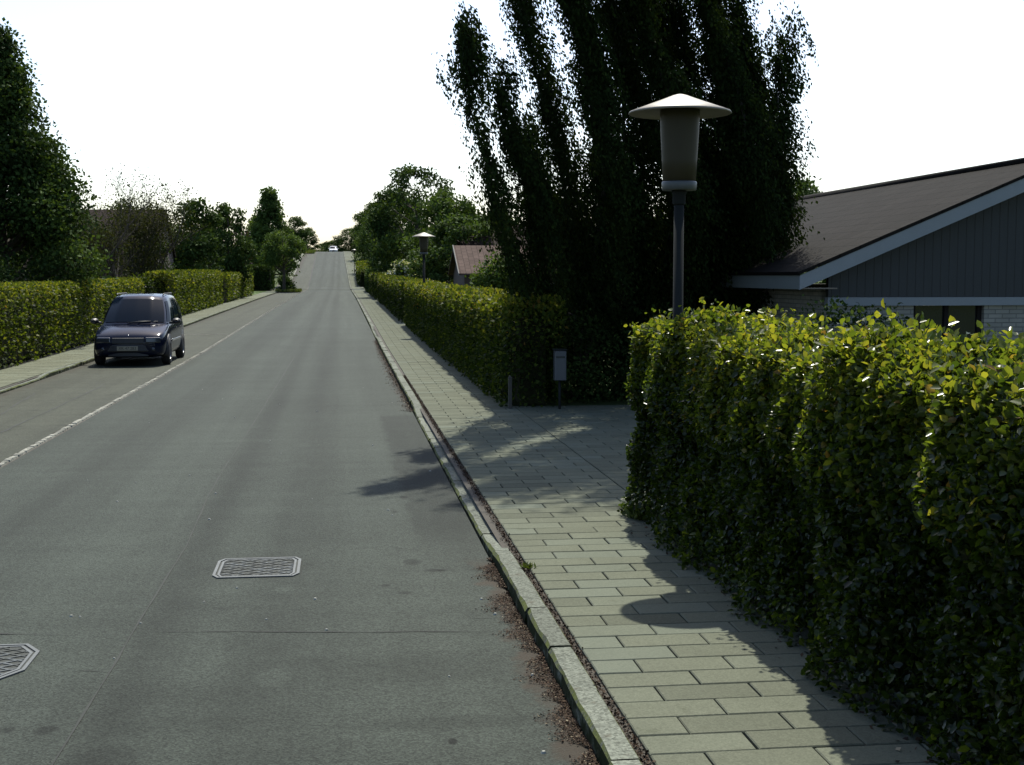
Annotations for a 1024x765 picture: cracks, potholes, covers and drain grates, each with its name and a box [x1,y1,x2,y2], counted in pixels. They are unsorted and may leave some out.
manhole cover [0,643,40,680]
manhole cover [212,557,301,579]
